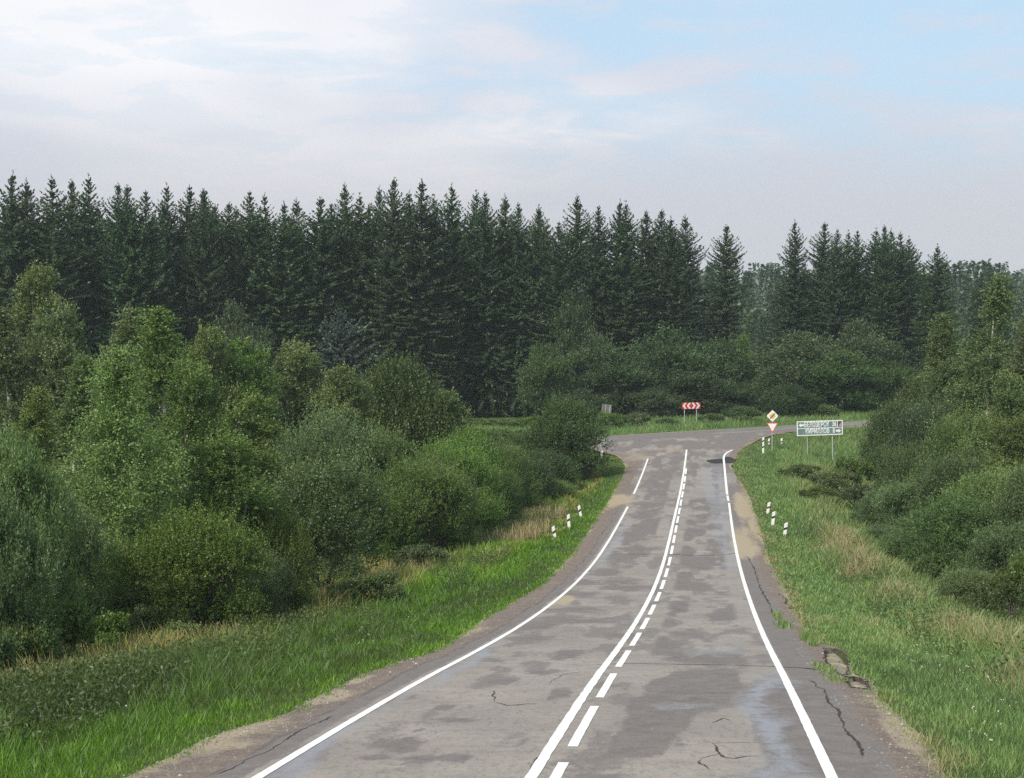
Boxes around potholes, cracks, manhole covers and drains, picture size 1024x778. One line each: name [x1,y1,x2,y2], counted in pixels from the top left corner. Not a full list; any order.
pothole [822,647,850,675]
crack [672,553,792,625]
pothole [844,676,871,689]
crack [698,718,754,769]
crack [219,716,330,774]
crack [624,663,864,756]
